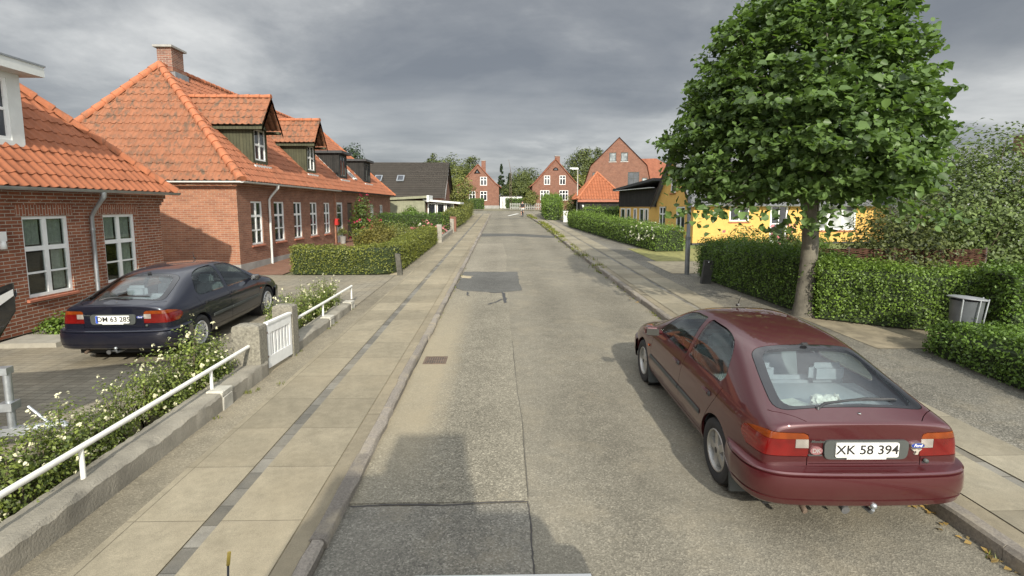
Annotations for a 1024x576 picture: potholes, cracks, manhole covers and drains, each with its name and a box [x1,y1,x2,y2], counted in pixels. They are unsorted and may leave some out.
drain grate [423,356,448,364]
